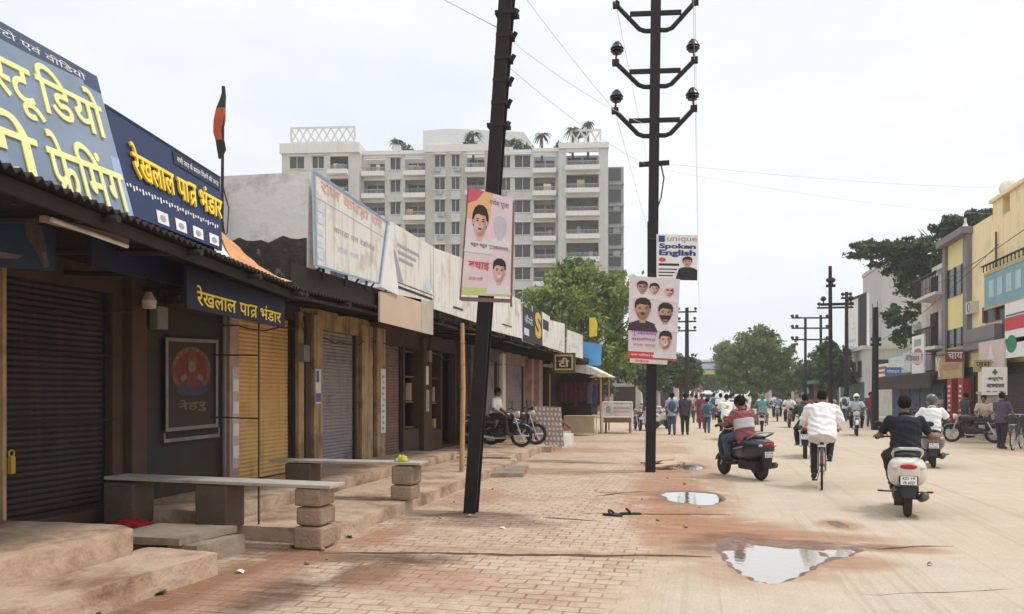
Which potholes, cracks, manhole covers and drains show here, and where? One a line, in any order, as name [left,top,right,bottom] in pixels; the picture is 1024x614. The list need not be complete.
pothole [654,490,727,505]
pothole [714,536,865,584]
